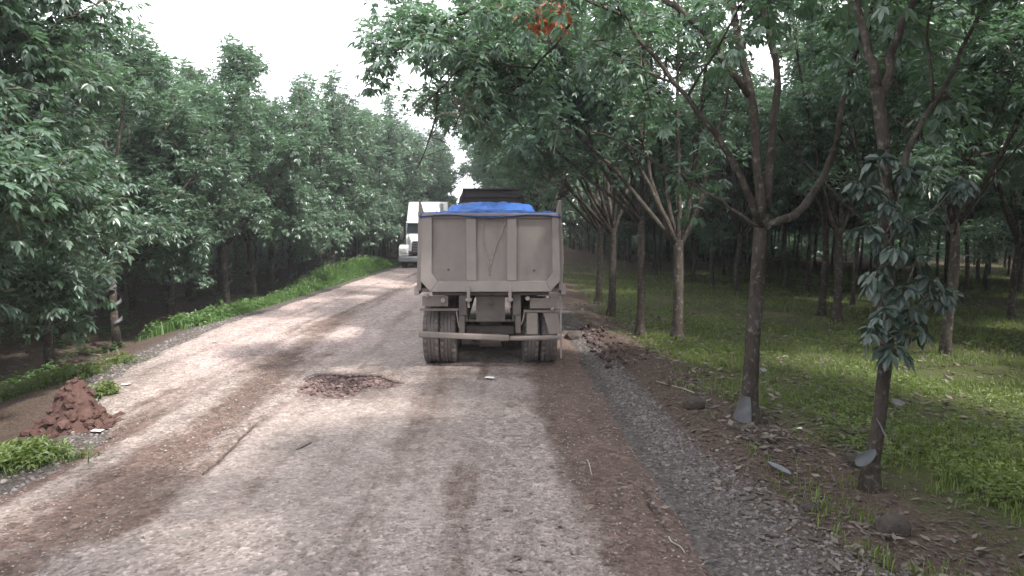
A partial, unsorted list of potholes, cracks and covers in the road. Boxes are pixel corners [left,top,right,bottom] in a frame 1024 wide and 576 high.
pothole [296,373,405,399]
crack [202,423,257,475]
